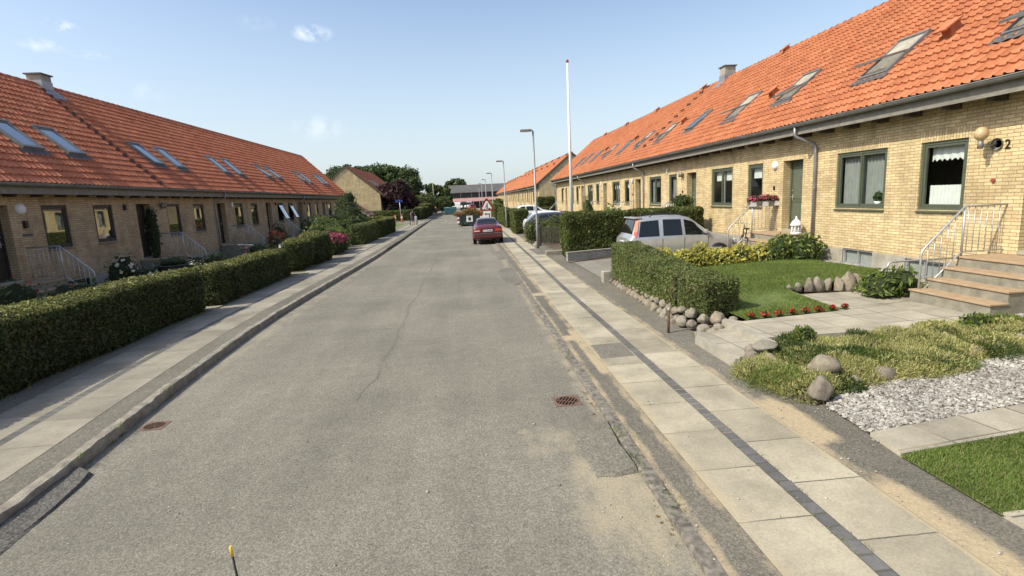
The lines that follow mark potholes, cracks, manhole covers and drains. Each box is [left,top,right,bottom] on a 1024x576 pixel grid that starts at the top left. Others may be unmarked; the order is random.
drain grate [136,421,172,432]
drain grate [552,395,583,407]
crack [356,253,438,401]
